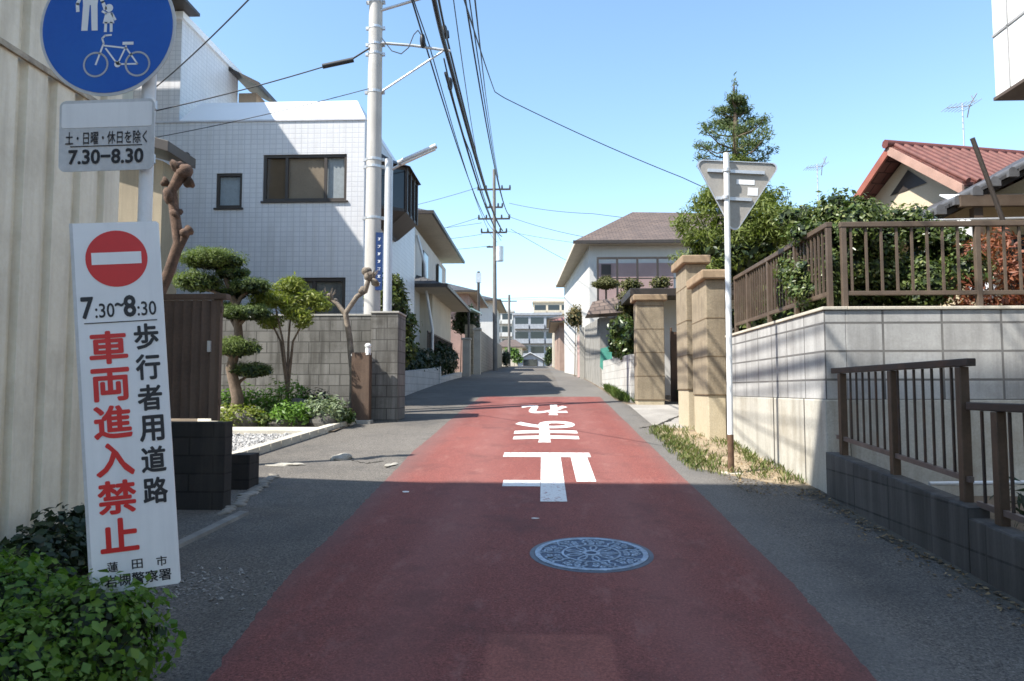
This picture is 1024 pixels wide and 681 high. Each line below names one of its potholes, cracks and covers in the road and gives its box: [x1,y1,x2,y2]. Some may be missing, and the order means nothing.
manhole cover [530,537,654,573]
